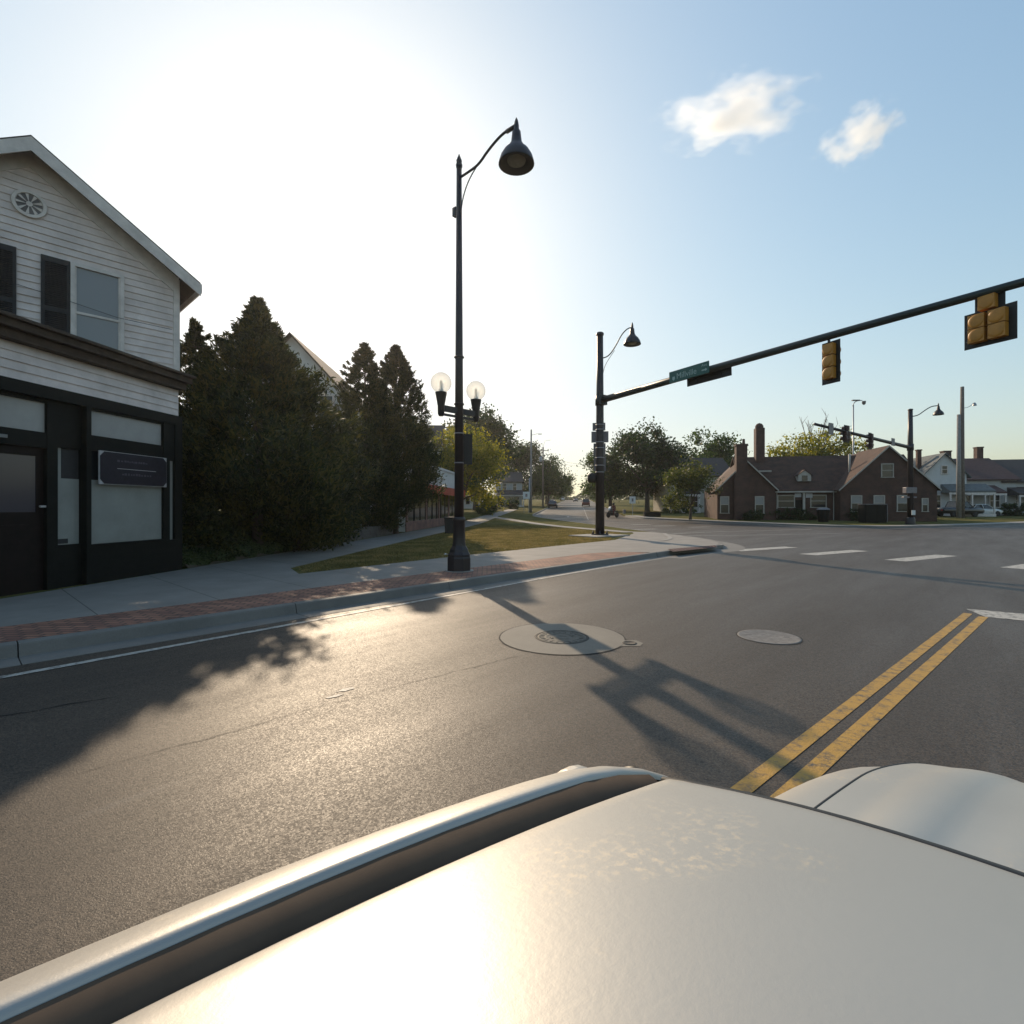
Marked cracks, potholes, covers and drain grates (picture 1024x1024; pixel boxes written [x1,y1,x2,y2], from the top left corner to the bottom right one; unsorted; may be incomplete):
manhole cover [736,629,803,645]
manhole cover [499,623,626,656]
crack [0,696,116,716]
